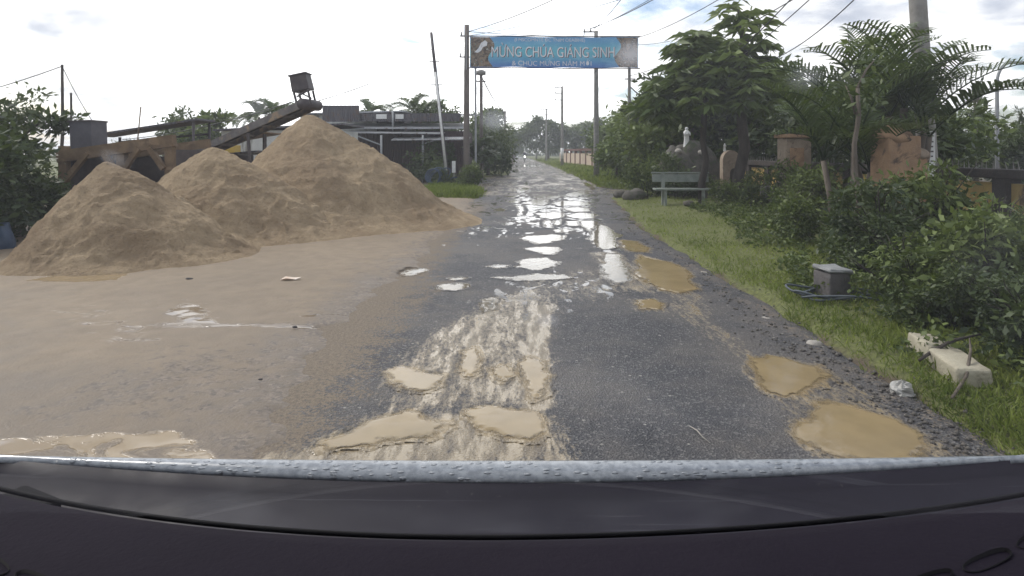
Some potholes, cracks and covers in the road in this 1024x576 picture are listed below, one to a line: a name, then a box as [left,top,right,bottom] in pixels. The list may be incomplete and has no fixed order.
pothole [618,239,653,253]
pothole [632,253,704,295]
pothole [398,267,433,277]
pothole [303,407,462,455]
pothole [513,354,558,404]
pothole [739,354,842,402]
pothole [787,398,937,458]
pothole [459,403,552,445]
pothole [377,365,451,395]
pothole [631,298,670,311]
